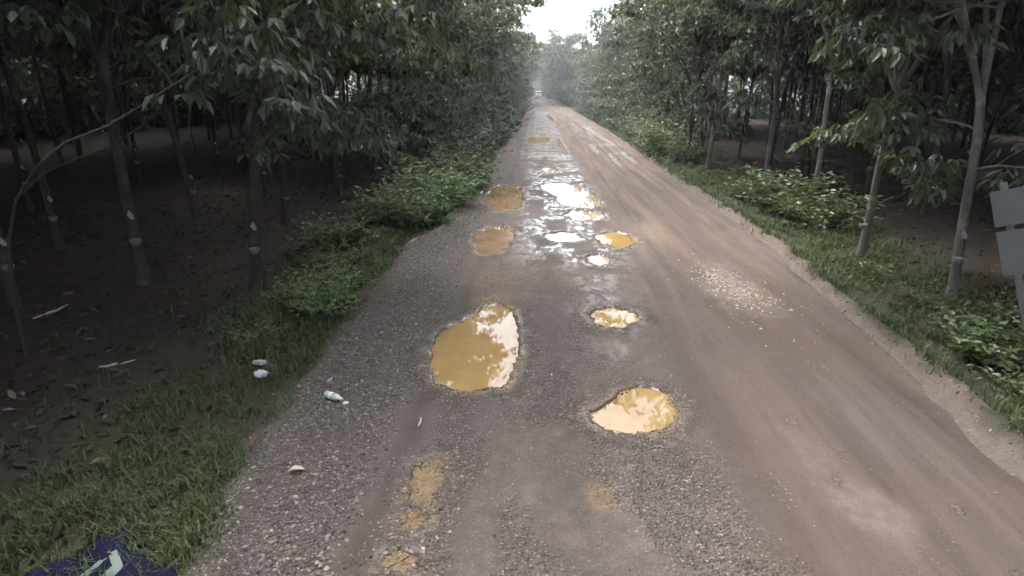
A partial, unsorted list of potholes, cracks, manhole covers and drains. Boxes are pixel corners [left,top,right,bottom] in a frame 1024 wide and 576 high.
pothole [401,457,452,513]
pothole [419,300,530,395]
pothole [536,182,608,210]
pothole [520,135,559,144]
pothole [558,209,612,222]
pothole [581,252,616,268]
pothole [538,230,592,244]
pothole [582,381,688,440]
pothole [373,544,425,576]
pothole [466,225,521,256]
pothole [393,506,430,535]
pothole [583,305,649,330]
